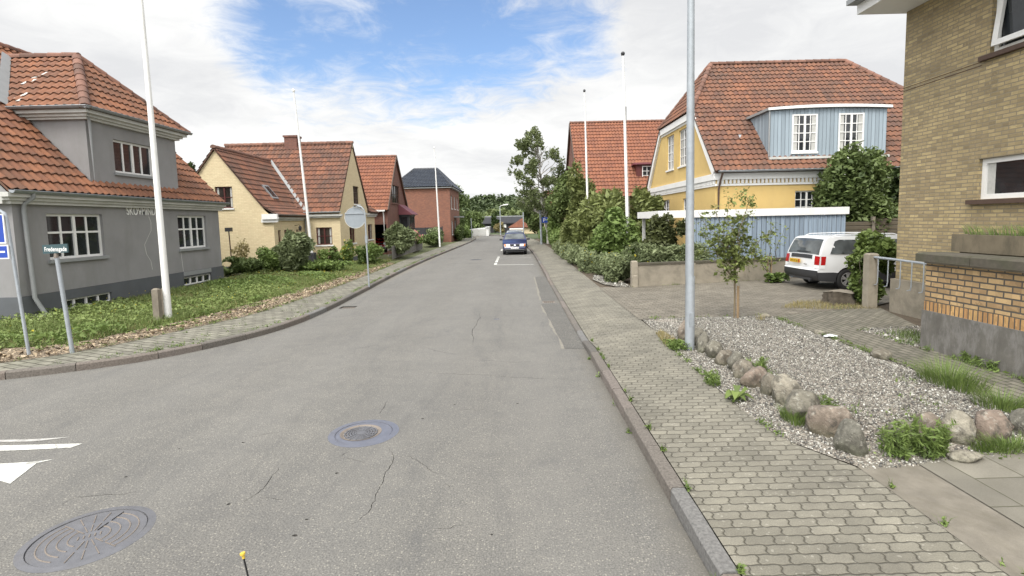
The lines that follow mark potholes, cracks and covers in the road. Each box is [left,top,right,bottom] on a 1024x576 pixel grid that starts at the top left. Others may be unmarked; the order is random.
manhole cover [328,420,399,448]
crack [359,449,451,520]
manhole cover [13,506,156,573]
crack [429,317,568,380]
